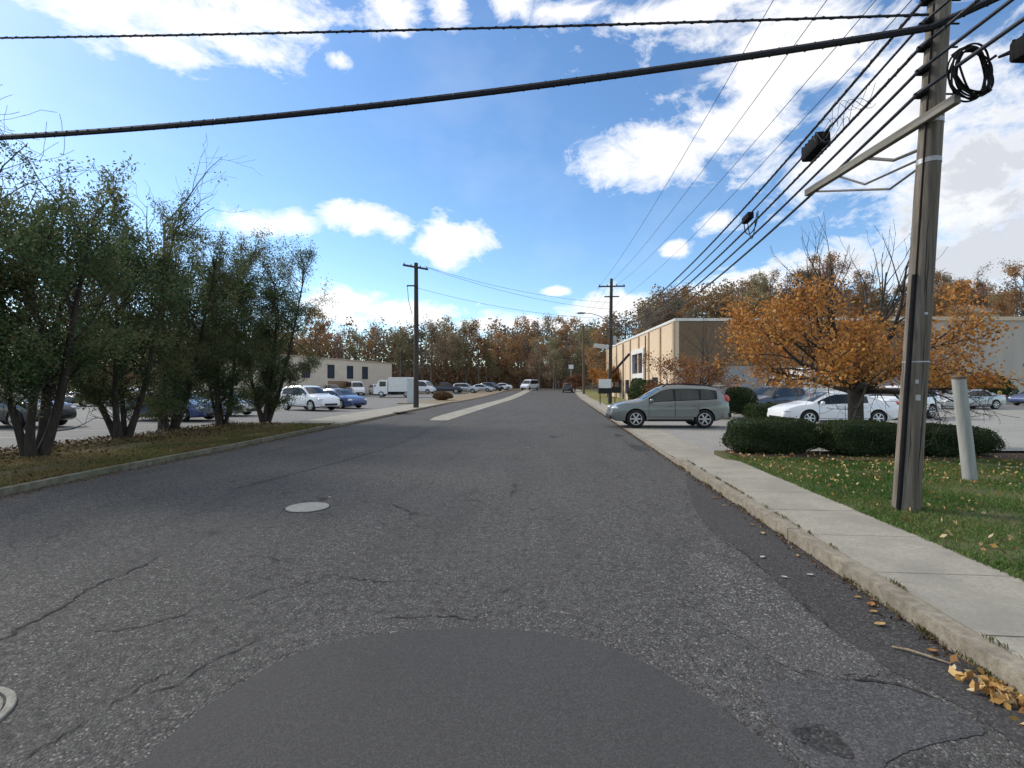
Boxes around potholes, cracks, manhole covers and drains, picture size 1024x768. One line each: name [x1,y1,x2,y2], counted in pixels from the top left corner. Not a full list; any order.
crack [0,557,157,640]
crack [836,678,937,699]
manhole cover [283,502,331,513]
crack [73,605,203,636]
crack [231,553,416,598]
crack [383,611,490,620]
crack [8,634,263,768]
manhole cover [0,686,17,721]
